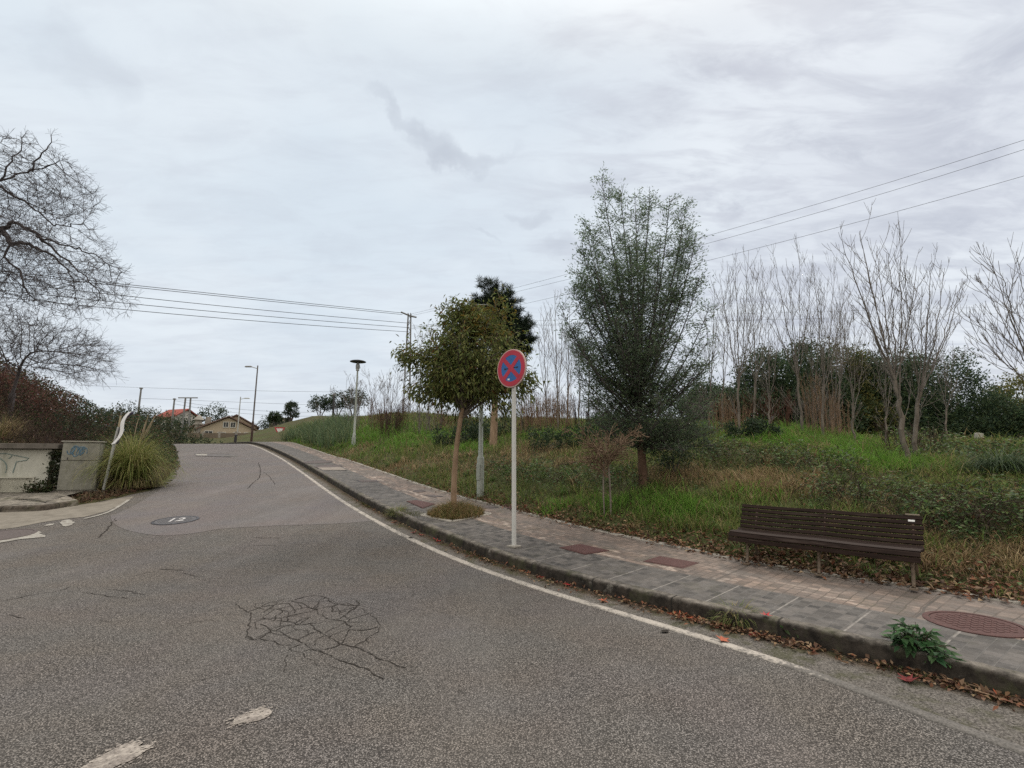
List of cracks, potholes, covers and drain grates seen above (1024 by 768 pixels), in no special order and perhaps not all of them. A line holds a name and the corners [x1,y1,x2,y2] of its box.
manhole cover [151,516,199,525]
crack [236,595,406,679]
manhole cover [922,611,1024,638]
crack [9,572,148,619]
